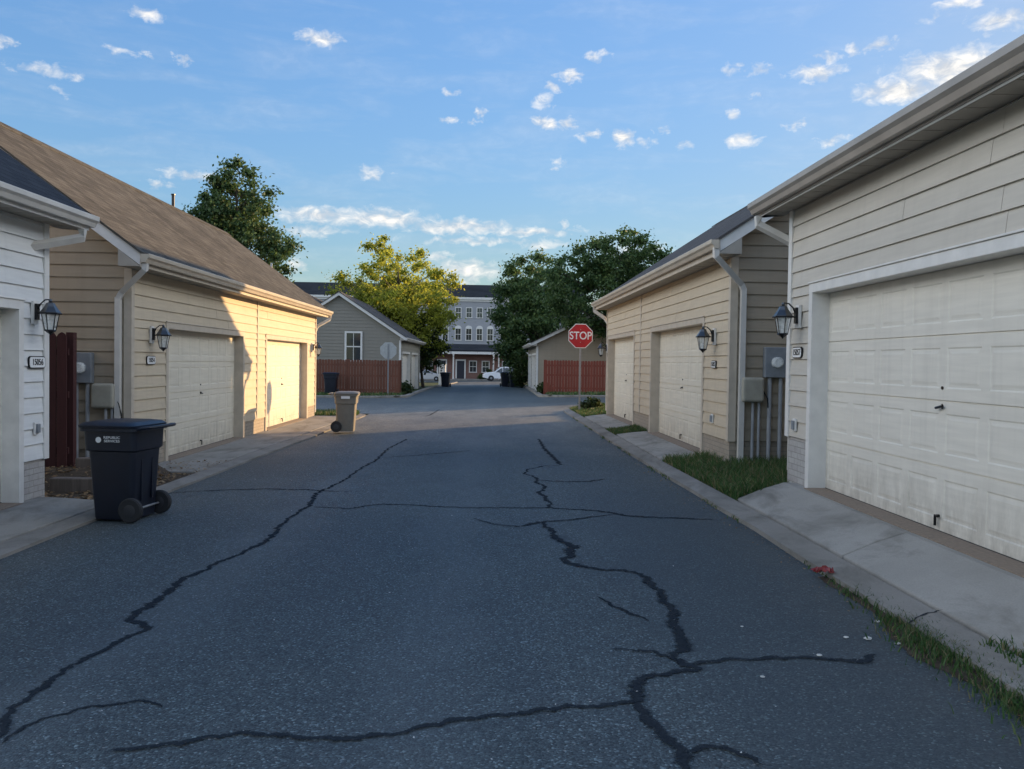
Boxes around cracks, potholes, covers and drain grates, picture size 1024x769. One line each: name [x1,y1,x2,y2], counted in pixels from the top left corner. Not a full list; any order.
crack [538,439,562,465]
crack [328,504,714,520]
crack [599,597,649,621]
